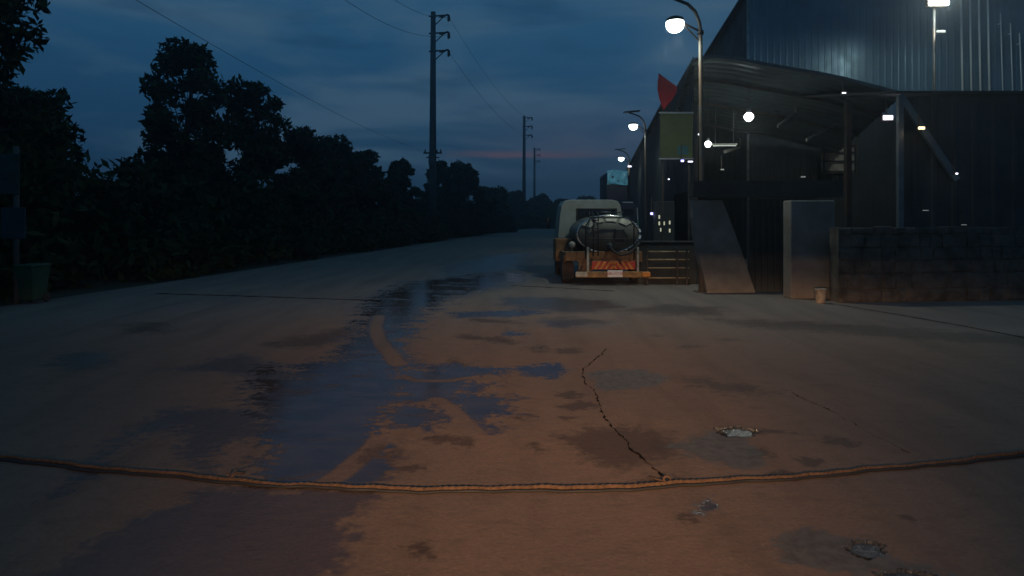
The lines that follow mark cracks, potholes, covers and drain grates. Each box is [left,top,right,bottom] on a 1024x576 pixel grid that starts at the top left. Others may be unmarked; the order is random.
pothole [844,539,888,561]
pothole [871,568,938,576]
pothole [713,425,762,437]
crack [582,350,664,477]
